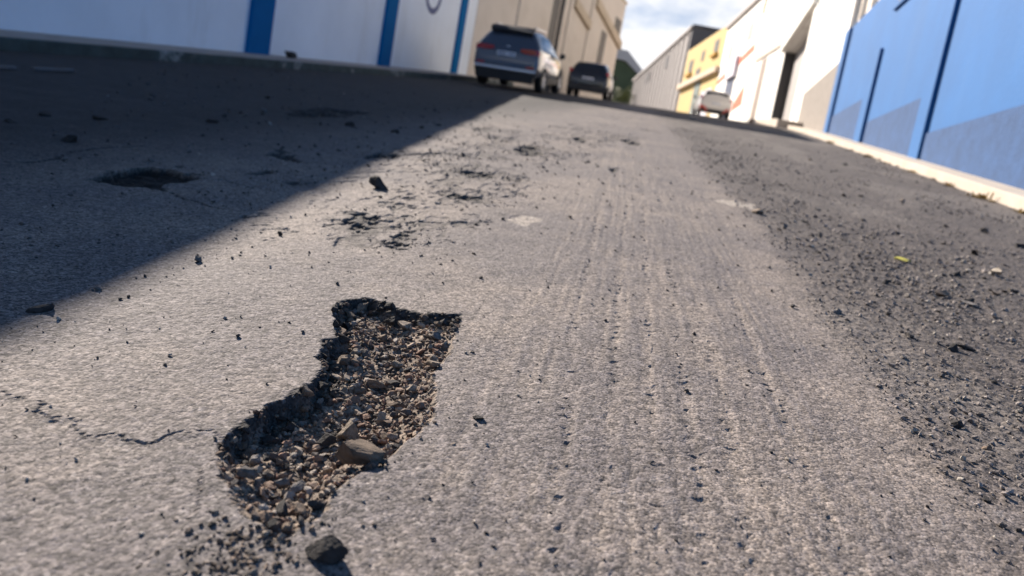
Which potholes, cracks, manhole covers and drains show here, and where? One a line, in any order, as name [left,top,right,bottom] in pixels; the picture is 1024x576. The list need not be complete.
pothole [217,298,462,540]
pothole [513,145,545,157]
pothole [287,107,366,118]
pothole [89,167,198,192]
crack [0,390,215,447]
